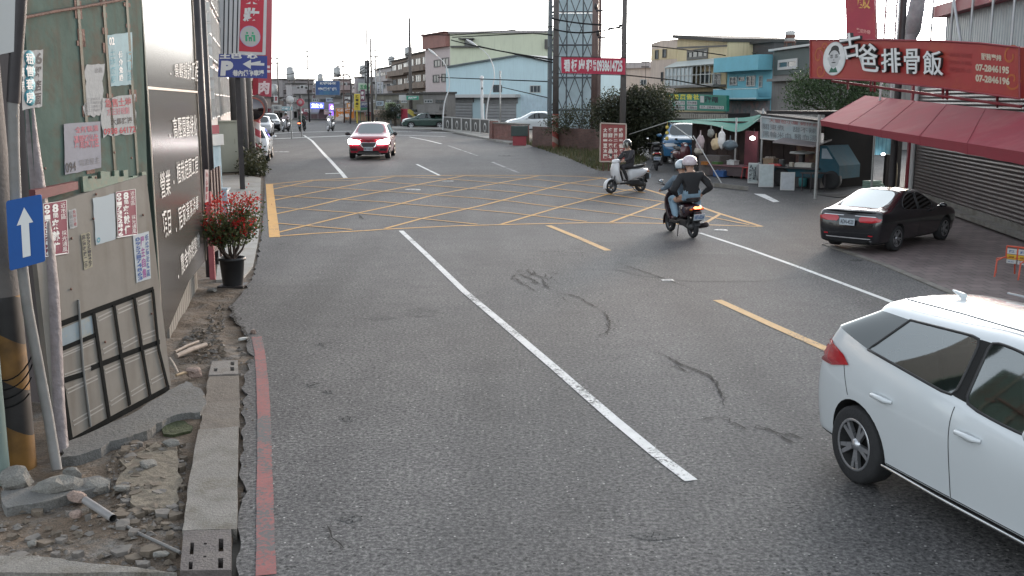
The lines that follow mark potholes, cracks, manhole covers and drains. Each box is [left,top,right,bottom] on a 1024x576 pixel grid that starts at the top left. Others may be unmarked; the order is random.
crack [512,242,643,335]
drain grate [180,529,232,576]
crack [657,351,803,444]
